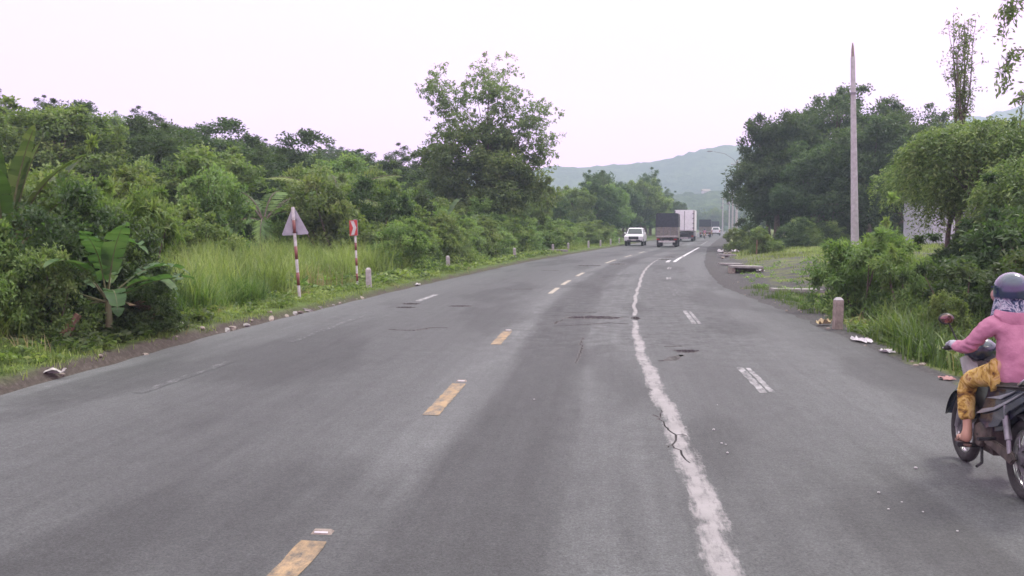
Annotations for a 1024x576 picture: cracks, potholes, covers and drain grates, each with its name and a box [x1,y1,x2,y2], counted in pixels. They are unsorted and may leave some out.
crack [652,410,690,463]
pothole [554,312,625,326]
pothole [658,346,700,361]
